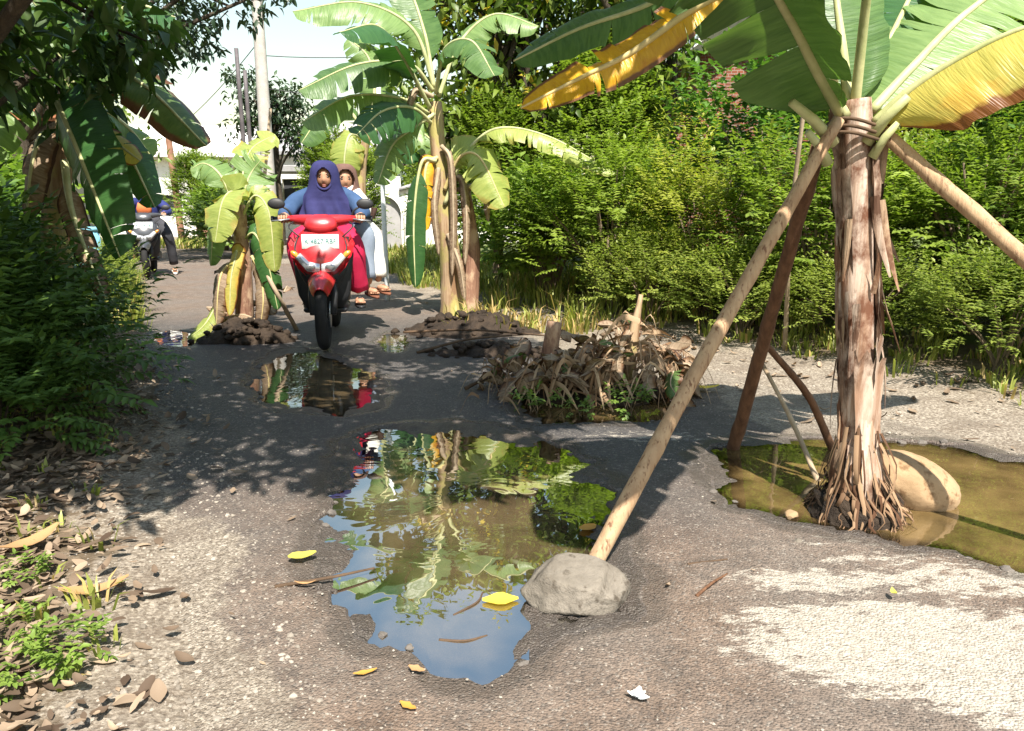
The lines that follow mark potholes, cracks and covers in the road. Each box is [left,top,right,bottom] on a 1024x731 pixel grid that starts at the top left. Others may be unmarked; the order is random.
pothole [244,347,390,417]
pothole [373,332,412,352]
pothole [303,421,650,685]
pothole [697,436,1024,573]
